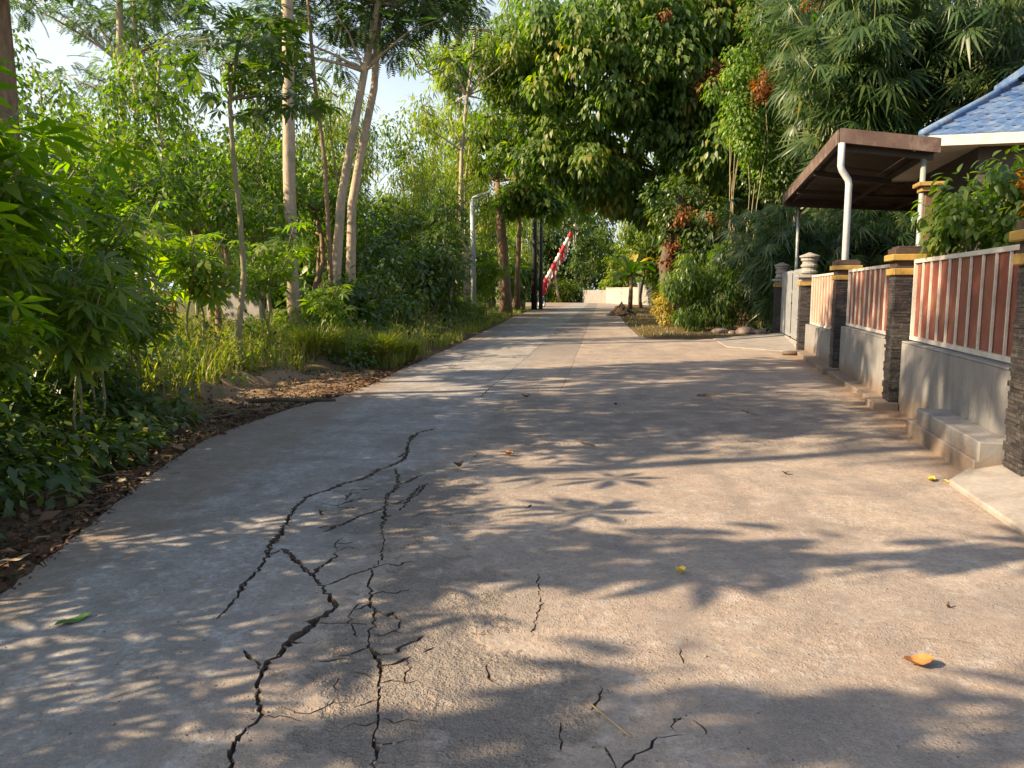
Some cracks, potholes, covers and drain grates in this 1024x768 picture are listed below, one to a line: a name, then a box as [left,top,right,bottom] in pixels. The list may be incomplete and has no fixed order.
crack [216,411,750,768]
